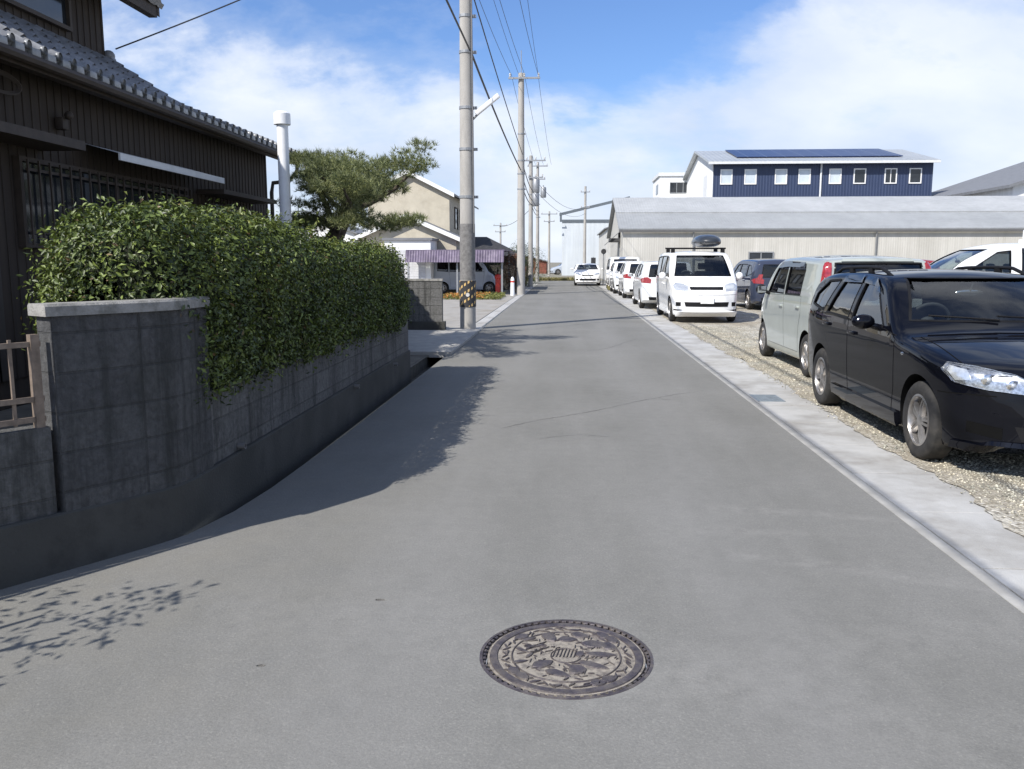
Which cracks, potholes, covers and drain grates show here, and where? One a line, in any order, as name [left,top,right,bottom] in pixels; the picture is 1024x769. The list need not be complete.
drain grate [749,394,786,402]
manhole cover [479,619,654,700]
